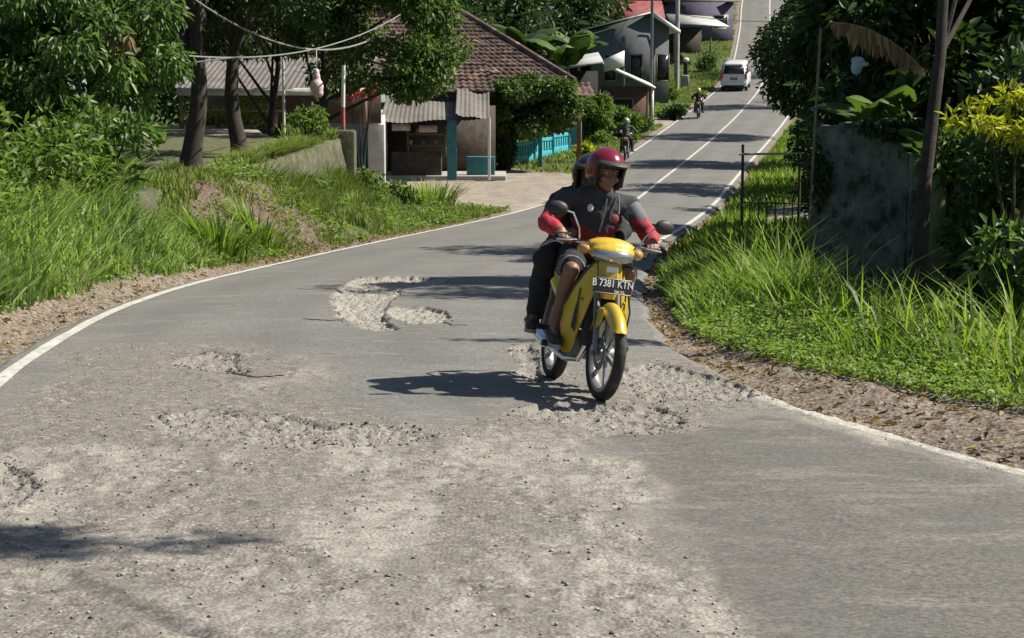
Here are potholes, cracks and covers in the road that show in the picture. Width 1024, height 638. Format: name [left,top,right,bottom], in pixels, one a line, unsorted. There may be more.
pothole [624,365,756,403]
pothole [316,425,426,447]
pothole [0,466,37,507]
pothole [518,404,685,435]
pothole [332,276,447,331]
pothole [175,353,241,373]
pothole [512,345,540,382]
pothole [150,410,333,449]
